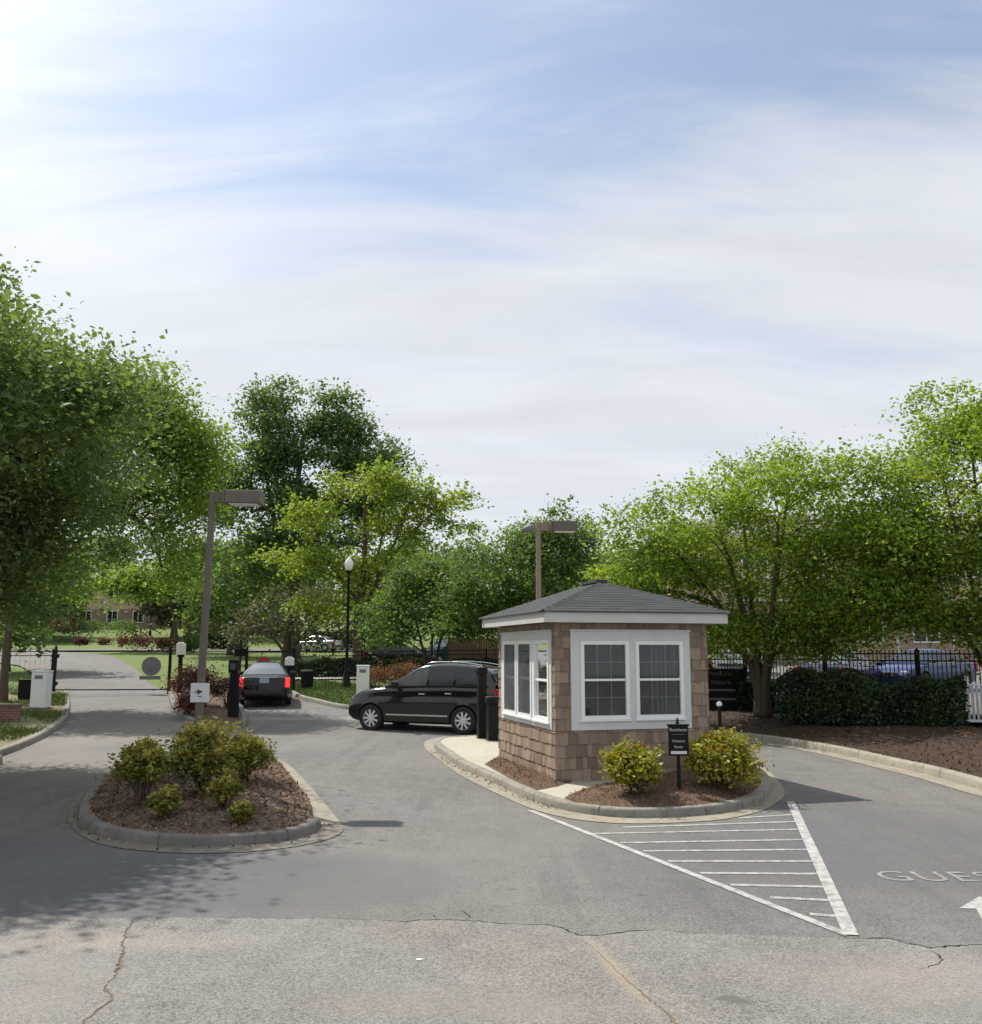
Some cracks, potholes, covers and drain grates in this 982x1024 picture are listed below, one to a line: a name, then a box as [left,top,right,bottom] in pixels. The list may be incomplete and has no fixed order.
crack [842,938,982,970]
crack [83,921,134,1024]
crack [231,910,679,1024]
